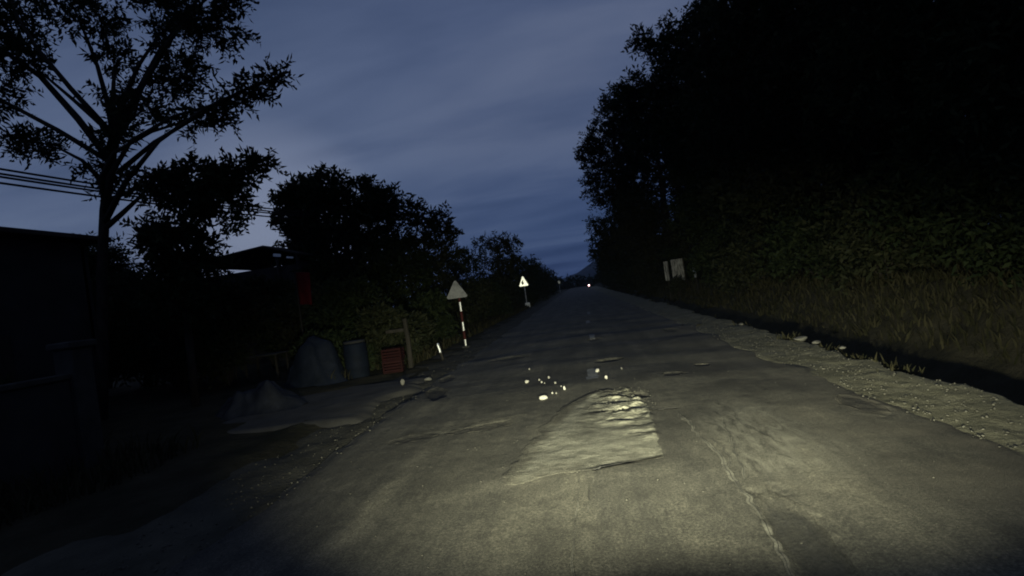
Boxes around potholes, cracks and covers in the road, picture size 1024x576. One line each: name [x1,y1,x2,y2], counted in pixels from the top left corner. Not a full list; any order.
crack [587,394,795,576]
crack [409,413,528,434]
pothole [834,394,892,414]
